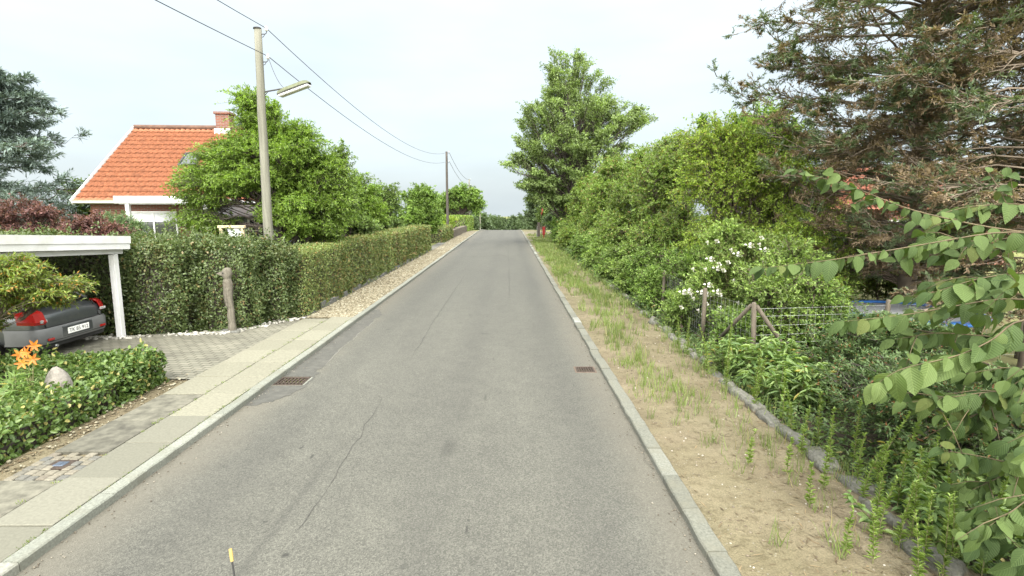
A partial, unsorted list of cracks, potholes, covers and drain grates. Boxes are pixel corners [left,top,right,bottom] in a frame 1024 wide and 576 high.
drain grate [273,377,313,385]
crack [297,395,382,530]
